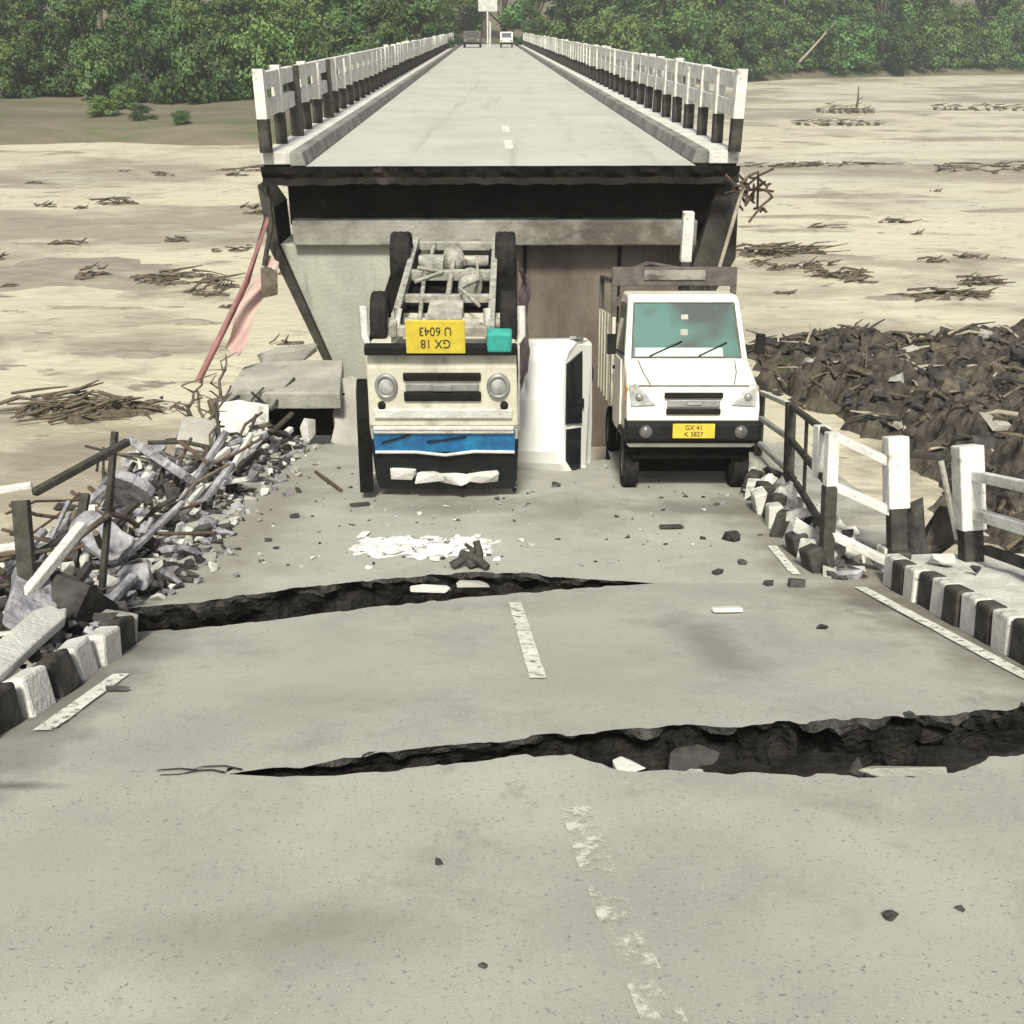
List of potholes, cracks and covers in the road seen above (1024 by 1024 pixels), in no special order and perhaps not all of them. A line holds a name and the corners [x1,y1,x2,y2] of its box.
crack [157,702,1024,778]
crack [0,572,652,639]
